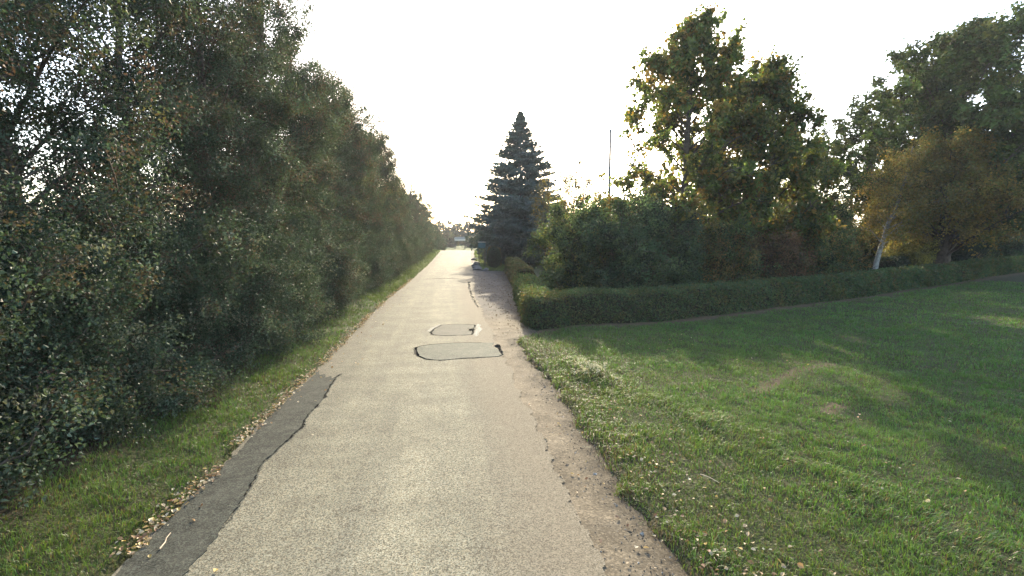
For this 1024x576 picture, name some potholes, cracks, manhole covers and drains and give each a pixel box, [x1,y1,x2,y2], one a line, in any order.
crack [438,278,479,307]
